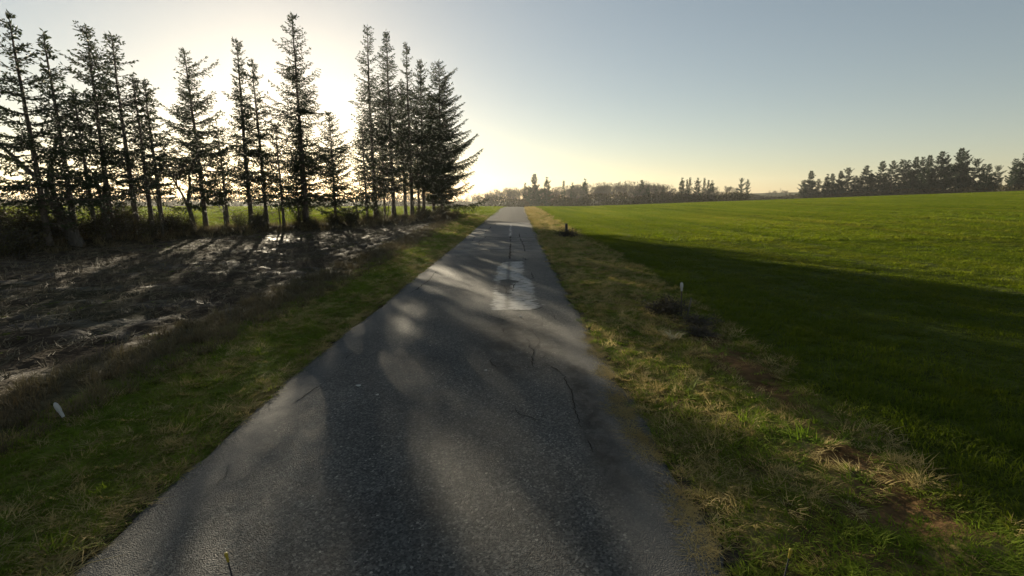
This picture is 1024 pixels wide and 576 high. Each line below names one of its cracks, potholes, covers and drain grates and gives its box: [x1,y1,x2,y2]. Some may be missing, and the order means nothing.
crack [472,226,593,452]
